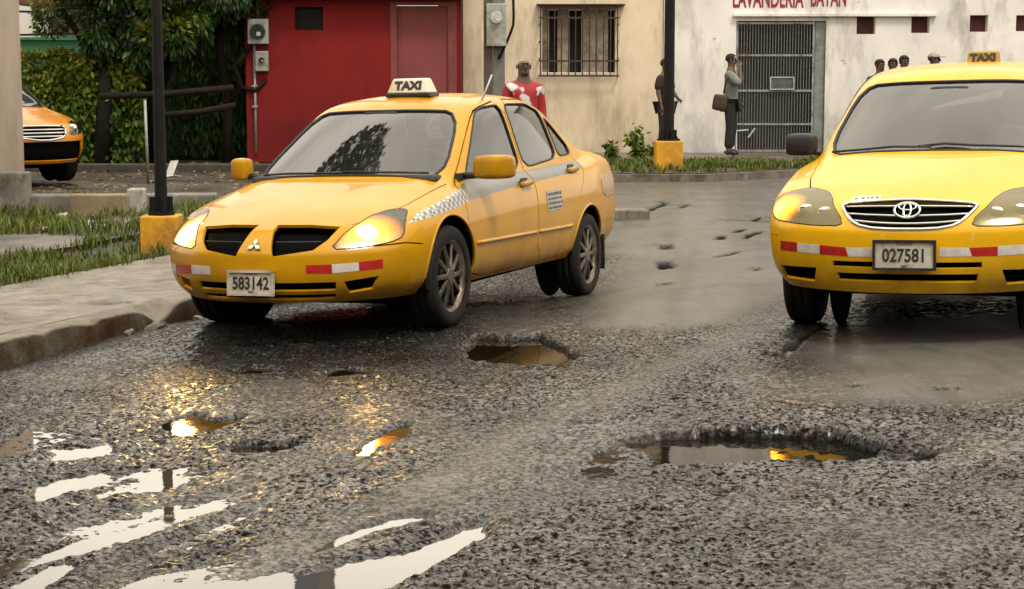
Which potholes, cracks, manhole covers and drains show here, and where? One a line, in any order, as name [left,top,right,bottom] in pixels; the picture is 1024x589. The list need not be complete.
pothole [656,259,681,270]
pothole [571,422,888,479]
crack [645,200,694,212]
pothole [310,365,381,377]
pothole [226,363,288,374]
pothole [456,331,592,367]
pothole [656,242,681,250]
pothole [342,419,422,457]
pothole [156,410,258,436]
pothole [226,434,316,454]
